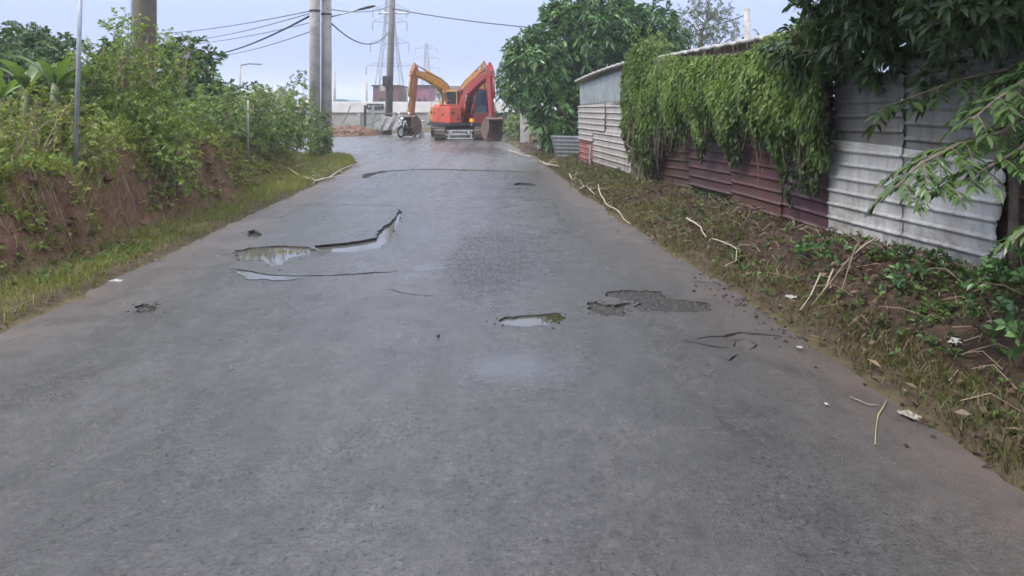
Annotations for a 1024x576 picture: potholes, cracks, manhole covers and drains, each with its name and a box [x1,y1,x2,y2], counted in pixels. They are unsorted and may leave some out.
pothole [605,290,713,313]
pothole [234,245,316,266]
pothole [587,301,631,316]
pothole [315,209,402,252]
crack [681,330,782,361]
crack [230,268,431,296]
pothole [498,313,566,326]
pothole [135,303,157,314]
crack [362,169,519,178]
